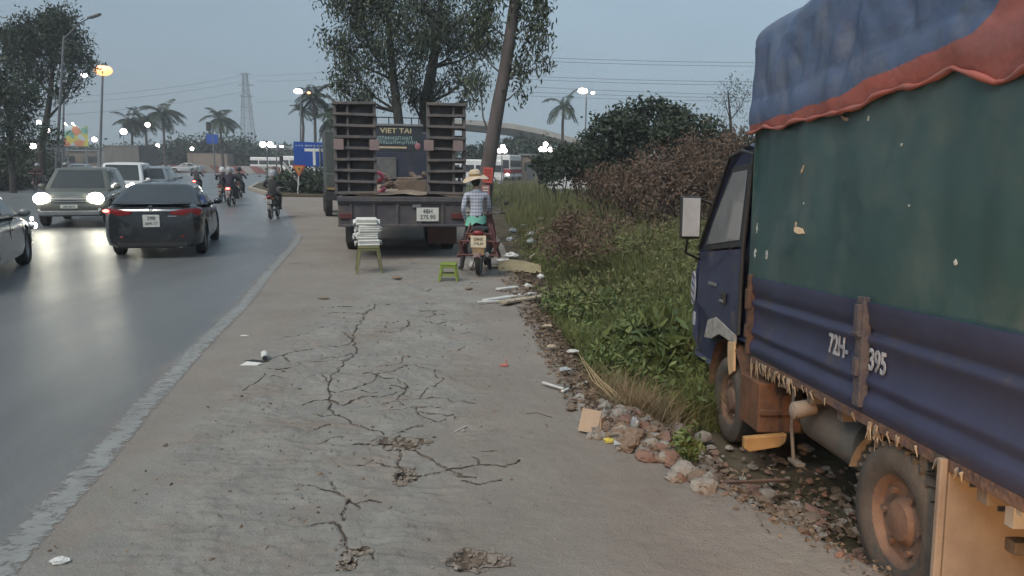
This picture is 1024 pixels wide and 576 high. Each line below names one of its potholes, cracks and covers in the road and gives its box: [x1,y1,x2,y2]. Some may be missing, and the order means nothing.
pothole [370,434,434,451]
pothole [392,466,418,486]
pothole [335,553,358,571]
pothole [440,547,516,574]
crack [243,282,520,559]
pothole [340,545,376,557]
